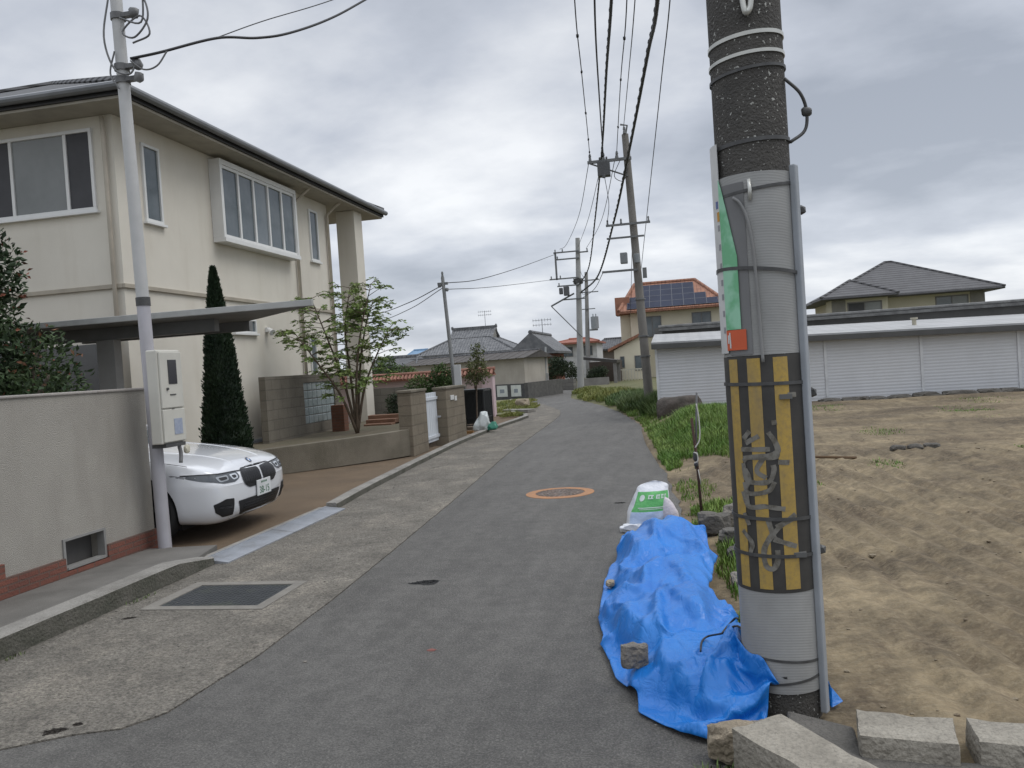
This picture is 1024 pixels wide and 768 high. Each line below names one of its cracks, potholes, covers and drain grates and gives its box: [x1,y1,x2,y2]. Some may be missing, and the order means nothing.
manhole cover [526,487,594,499]
pothole [41,727,69,736]
